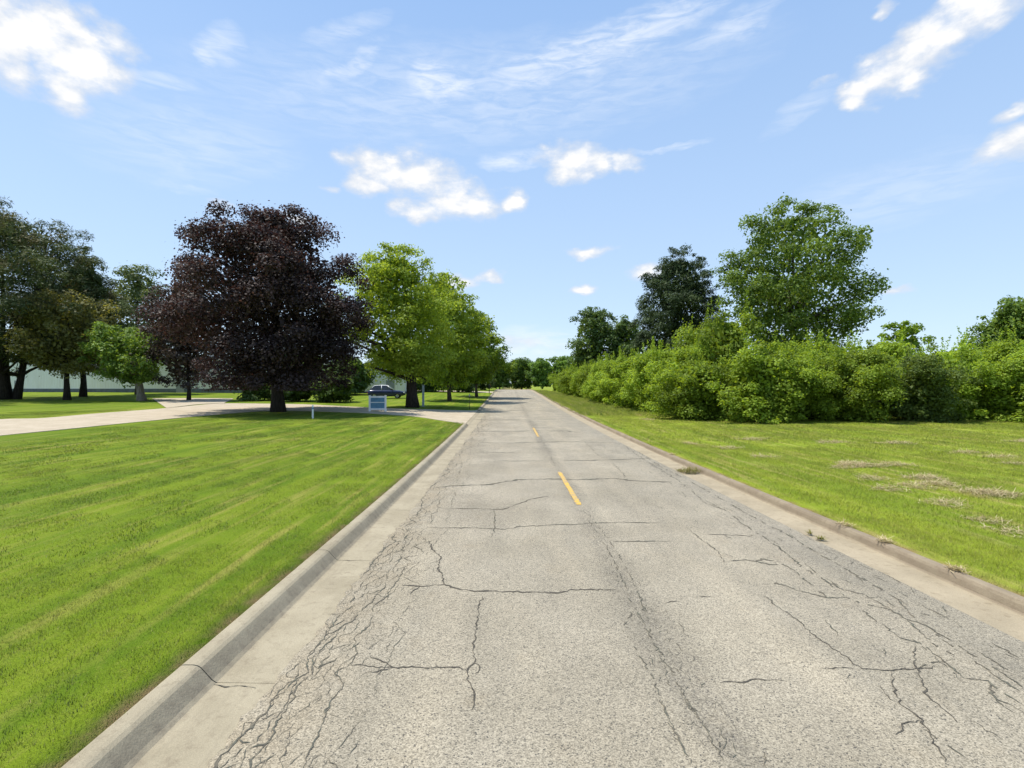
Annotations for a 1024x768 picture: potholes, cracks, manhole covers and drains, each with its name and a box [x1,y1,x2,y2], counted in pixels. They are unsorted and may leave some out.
crack [213,410,767,768]
crack [589,433,1024,761]
